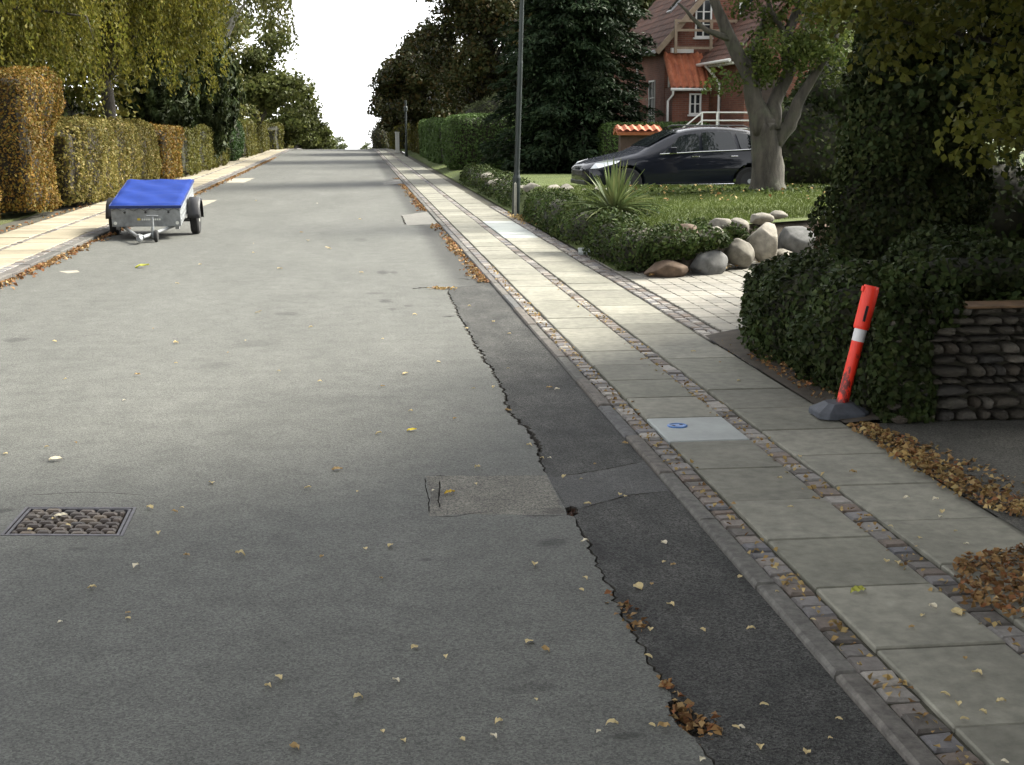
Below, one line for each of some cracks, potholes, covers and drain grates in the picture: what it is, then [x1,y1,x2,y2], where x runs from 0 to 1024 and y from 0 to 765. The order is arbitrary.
crack [424,475,473,517]
crack [526,515,670,692]
crack [413,279,546,473]
